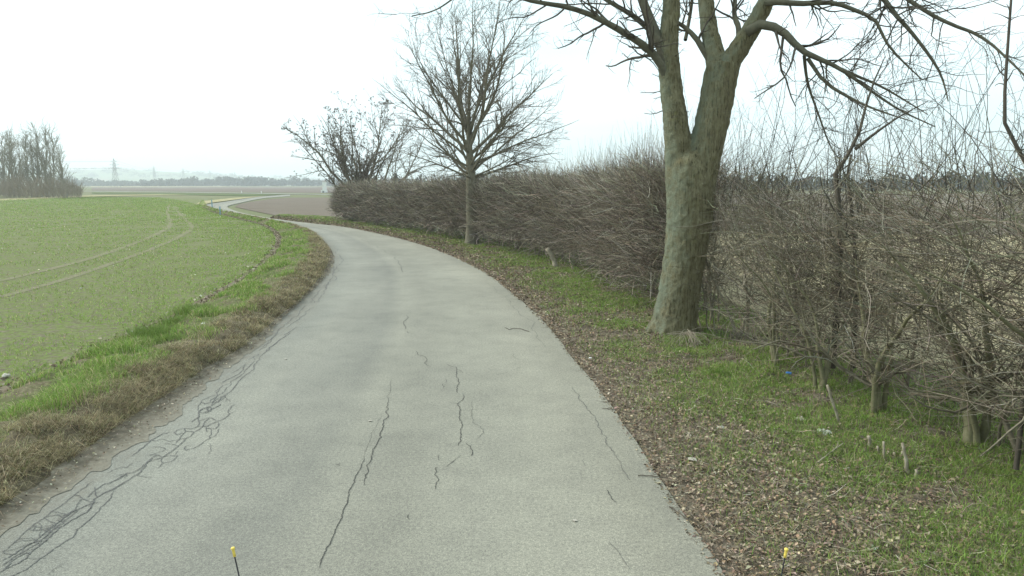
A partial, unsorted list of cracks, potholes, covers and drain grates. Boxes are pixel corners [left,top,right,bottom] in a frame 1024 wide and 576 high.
crack [416,351,484,489]
crack [319,382,391,568]
crack [0,357,260,576]
